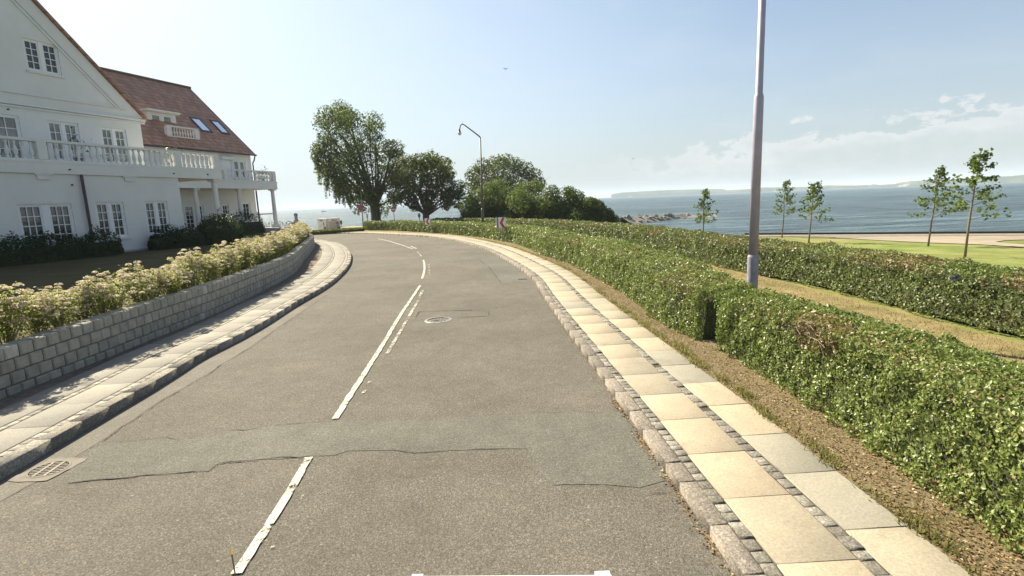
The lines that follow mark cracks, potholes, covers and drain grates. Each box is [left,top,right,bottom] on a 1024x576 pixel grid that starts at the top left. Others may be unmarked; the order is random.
crack [70,455,323,483]
